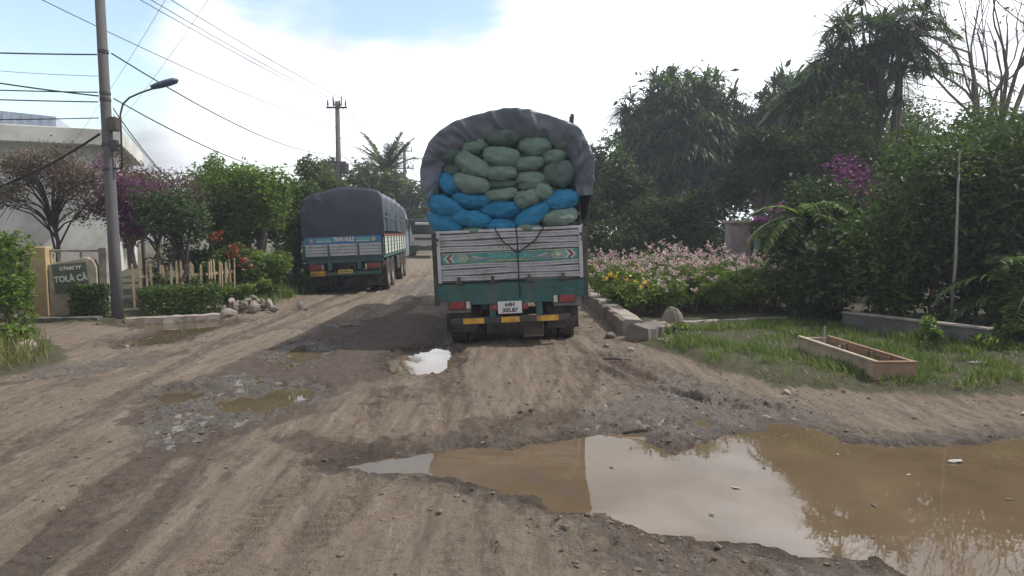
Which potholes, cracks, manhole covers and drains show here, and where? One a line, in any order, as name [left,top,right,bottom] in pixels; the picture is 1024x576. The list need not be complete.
pothole [323,416,1024,576]
pothole [372,343,468,376]
pothole [257,338,343,368]
pothole [140,375,329,450]
pothole [96,317,255,350]
